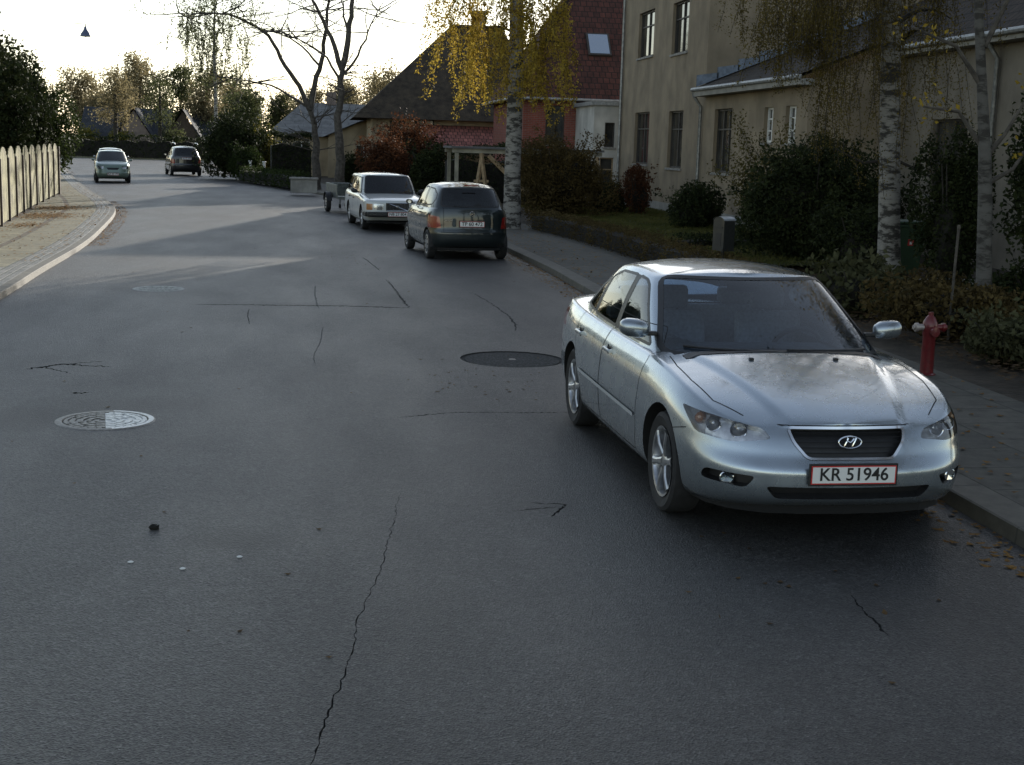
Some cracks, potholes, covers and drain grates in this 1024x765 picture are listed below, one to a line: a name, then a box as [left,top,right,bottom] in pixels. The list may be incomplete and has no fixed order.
crack [514,502,568,516]
crack [849,594,888,635]
crack [196,258,410,324]
manhole cover [54,410,156,431]
crack [31,362,109,373]
manhole cover [460,351,562,367]
crack [310,480,405,765]
